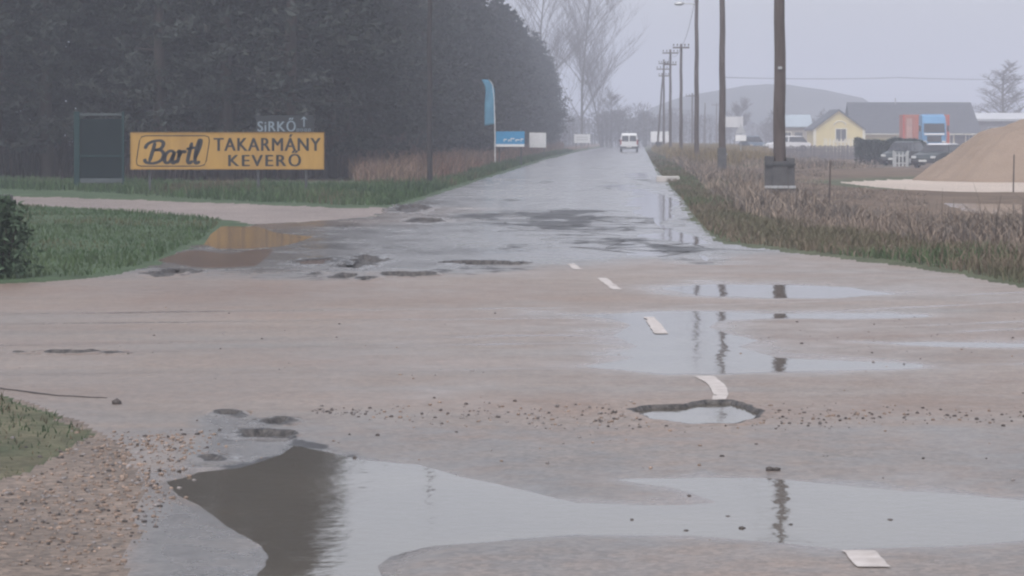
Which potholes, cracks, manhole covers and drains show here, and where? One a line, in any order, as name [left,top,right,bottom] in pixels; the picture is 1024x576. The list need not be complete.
pothole [206,409,252,417]
pothole [246,416,304,427]
pothole [324,254,395,270]
pothole [614,399,776,427]
pothole [129,268,208,278]
pothole [185,453,243,466]
pothole [363,271,443,279]
crack [0,387,107,398]
pothole [381,203,440,214]
pothole [217,427,305,441]
